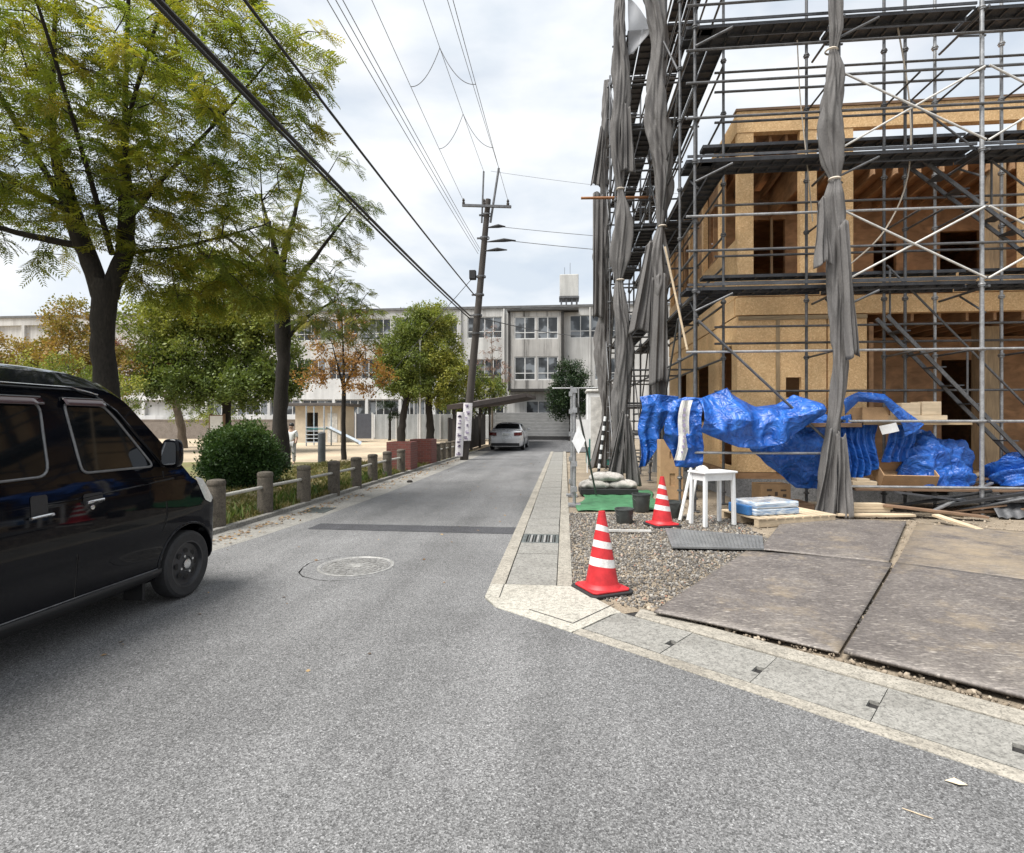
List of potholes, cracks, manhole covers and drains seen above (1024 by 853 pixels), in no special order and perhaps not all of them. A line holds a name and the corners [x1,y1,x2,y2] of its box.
drain grate [521,534,559,543]
manhole cover [317,556,394,577]
